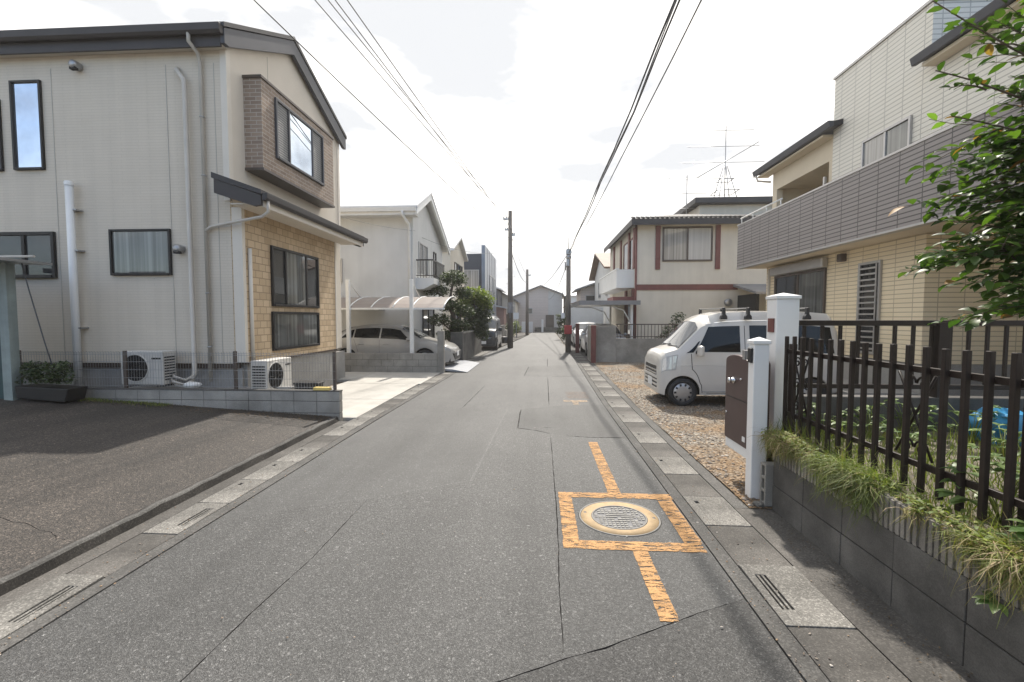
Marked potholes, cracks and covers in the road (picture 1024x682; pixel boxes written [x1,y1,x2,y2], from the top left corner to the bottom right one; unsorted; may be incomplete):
crack [497,411,742,682]
manhole cover [579,501,661,537]
crack [180,500,367,682]
